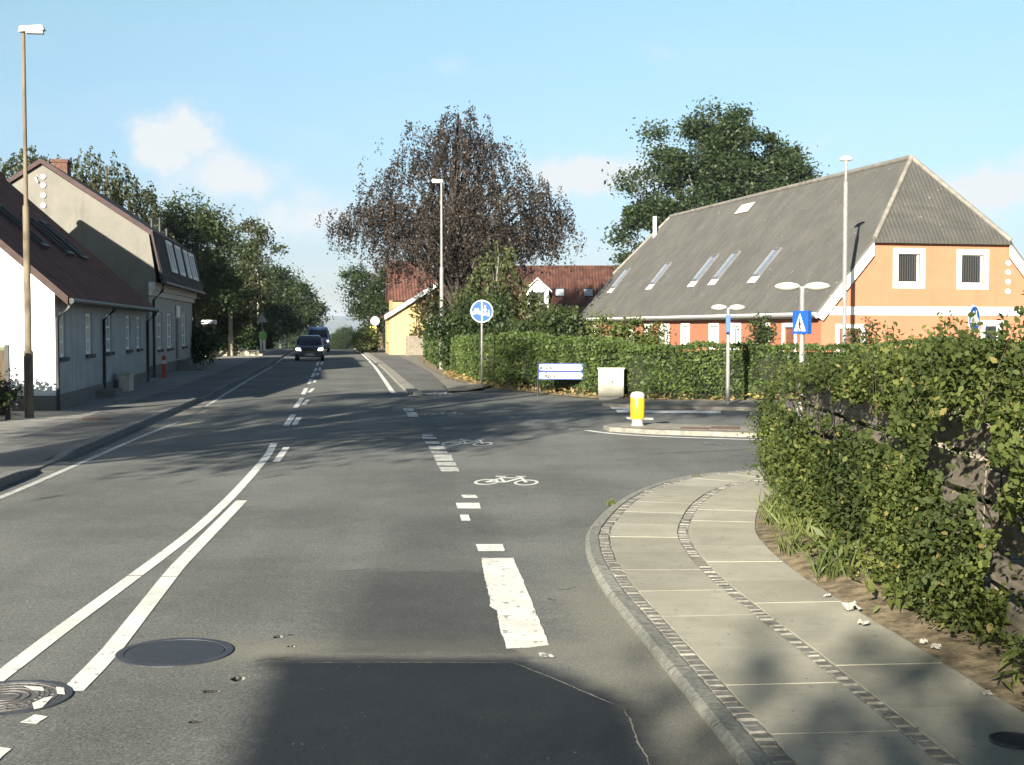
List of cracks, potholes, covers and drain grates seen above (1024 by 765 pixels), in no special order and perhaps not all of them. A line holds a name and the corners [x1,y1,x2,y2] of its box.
manhole cover [115,638,234,667]
manhole cover [989,732,1024,750]
manhole cover [0,680,73,716]
